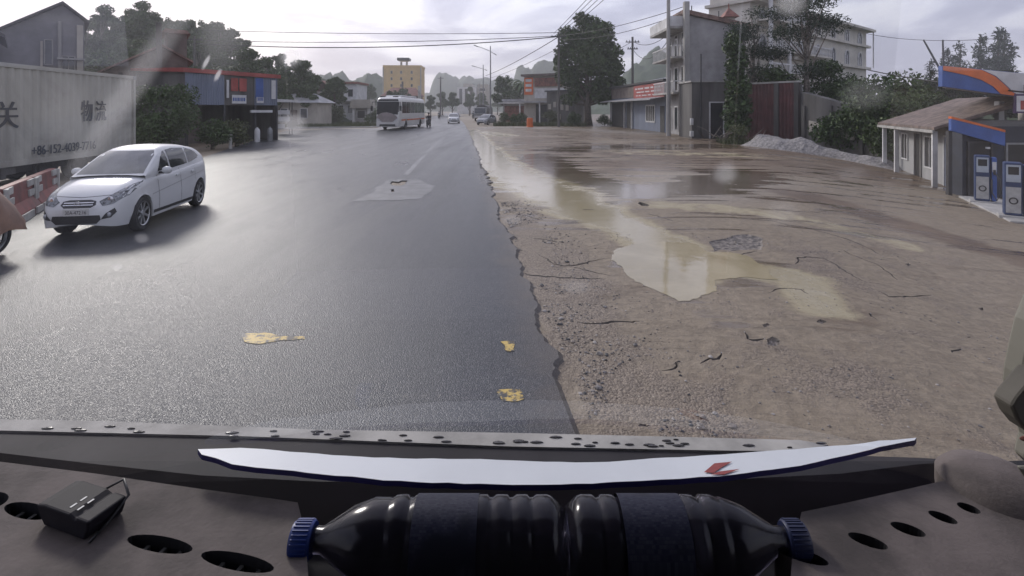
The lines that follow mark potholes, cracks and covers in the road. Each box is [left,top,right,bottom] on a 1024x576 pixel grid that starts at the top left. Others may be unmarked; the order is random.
crack [736,218,929,320]
crack [525,239,610,279]
pothole [709,234,763,251]
